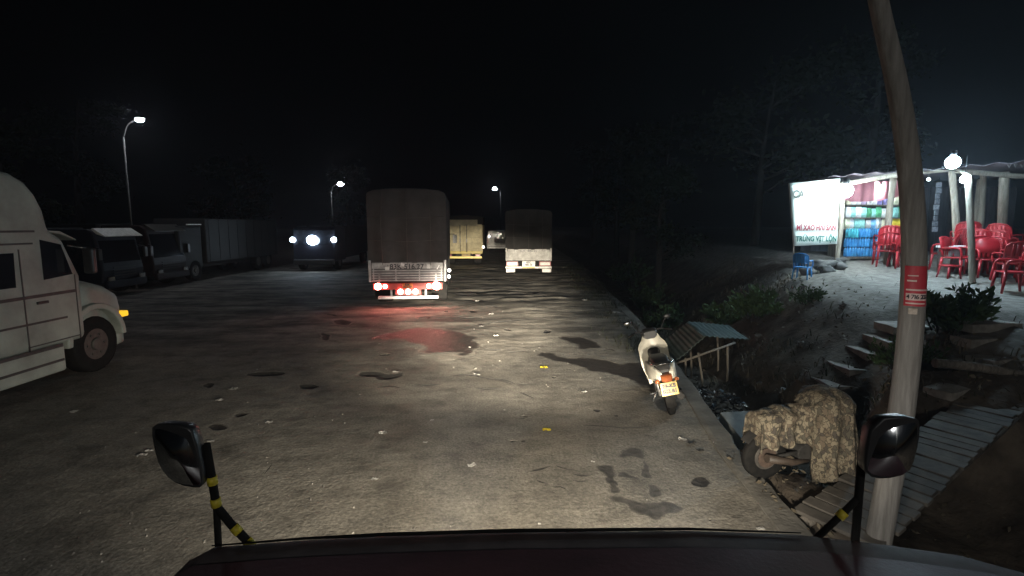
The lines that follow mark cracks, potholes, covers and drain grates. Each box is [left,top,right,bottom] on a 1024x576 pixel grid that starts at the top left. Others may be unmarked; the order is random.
pothole [688,476,712,488]
pothole [356,371,405,380]
pothole [206,423,229,431]
